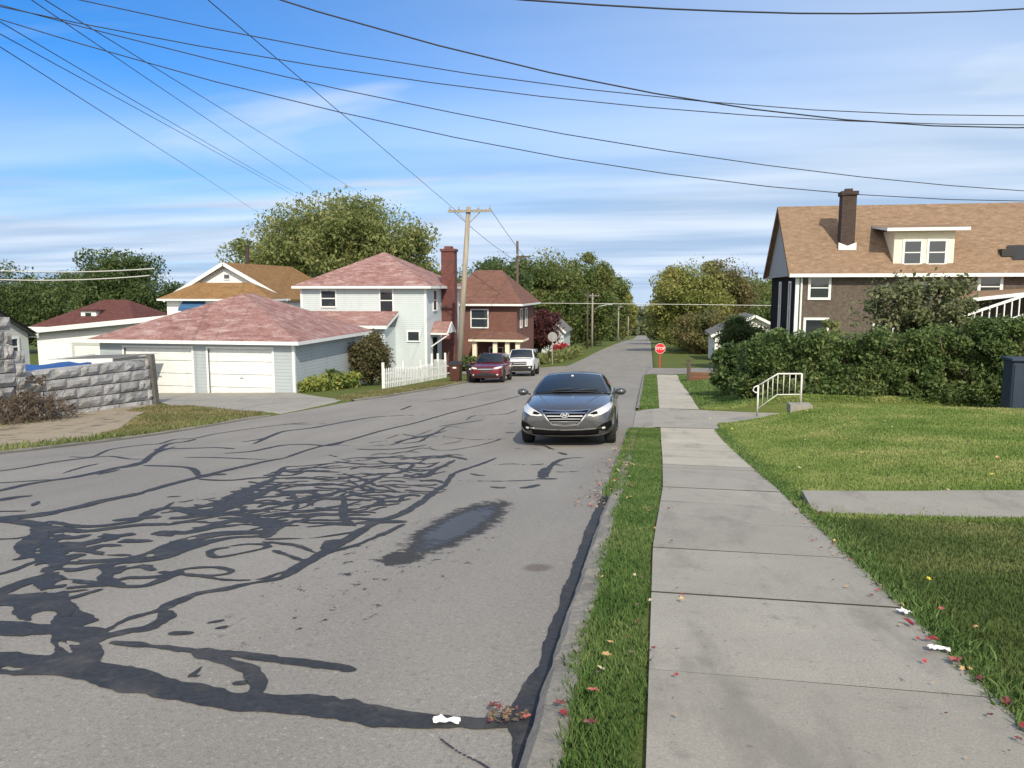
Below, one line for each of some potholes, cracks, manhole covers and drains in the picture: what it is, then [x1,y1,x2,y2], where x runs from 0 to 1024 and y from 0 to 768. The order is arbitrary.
crack [439,737,489,768]
